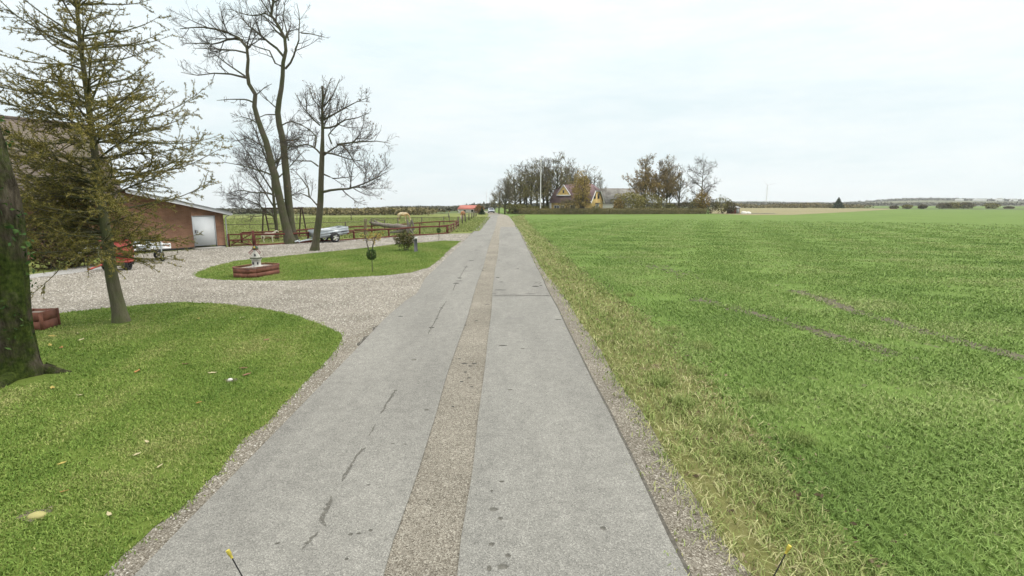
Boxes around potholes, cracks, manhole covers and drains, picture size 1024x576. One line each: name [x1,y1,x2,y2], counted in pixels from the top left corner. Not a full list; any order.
crack [302,496,332,550]
crack [342,391,395,479]
